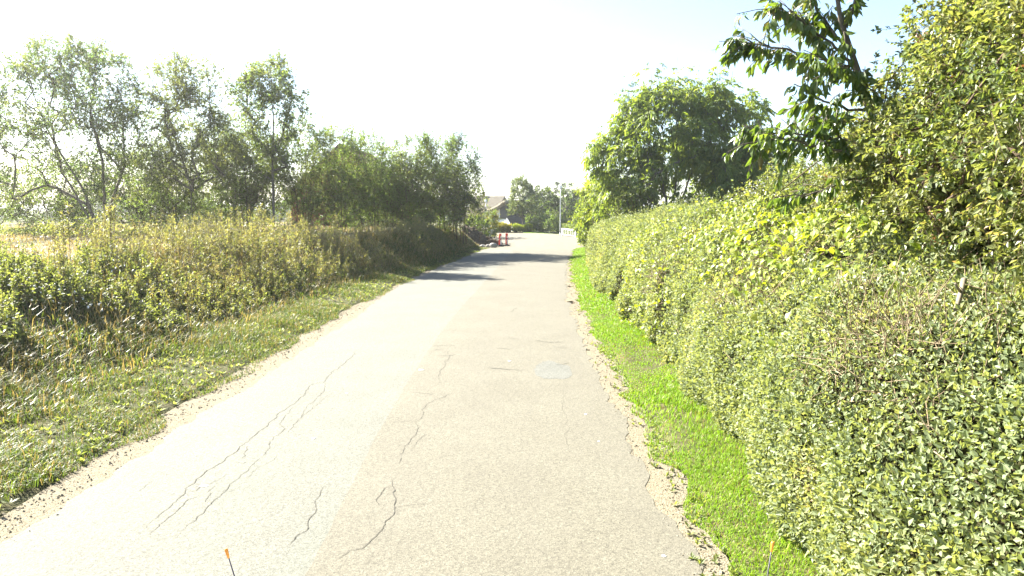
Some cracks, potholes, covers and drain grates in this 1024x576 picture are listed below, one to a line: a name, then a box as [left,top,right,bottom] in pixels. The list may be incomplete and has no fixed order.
crack [138,351,355,535]
crack [397,345,455,460]
crack [342,478,427,563]
